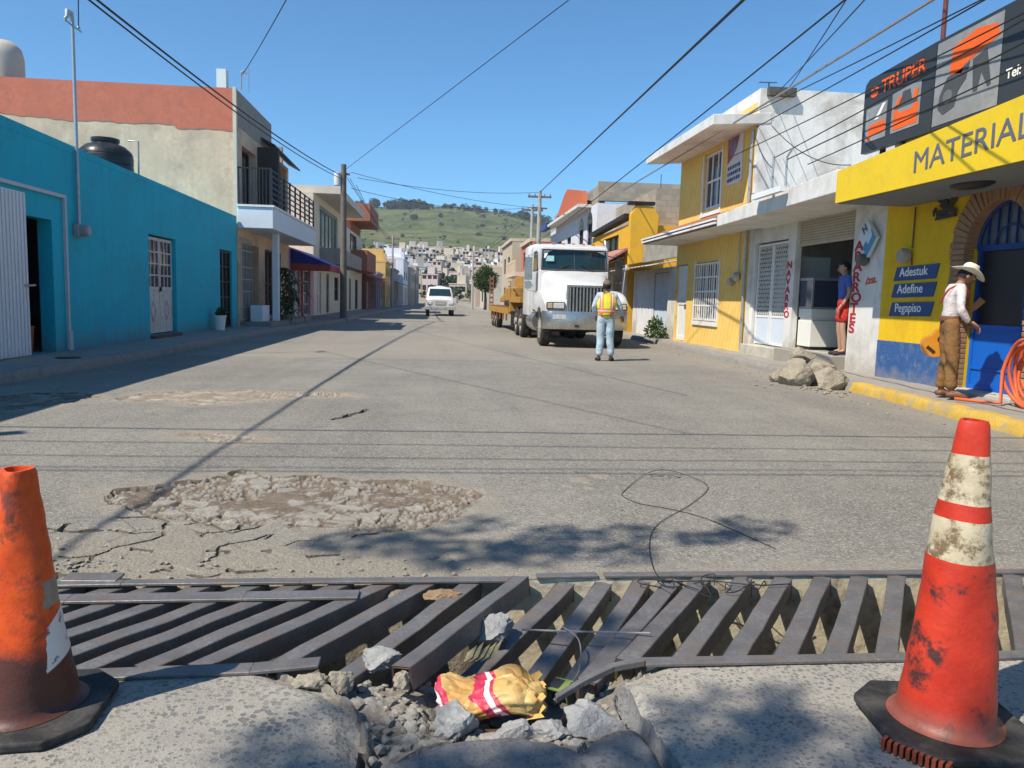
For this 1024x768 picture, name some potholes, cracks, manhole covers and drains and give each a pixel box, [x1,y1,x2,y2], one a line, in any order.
pothole [103,469,483,533]
pothole [275,668,646,768]
crack [331,409,370,420]
drain grate [57,569,1024,733]
crack [47,516,379,579]
